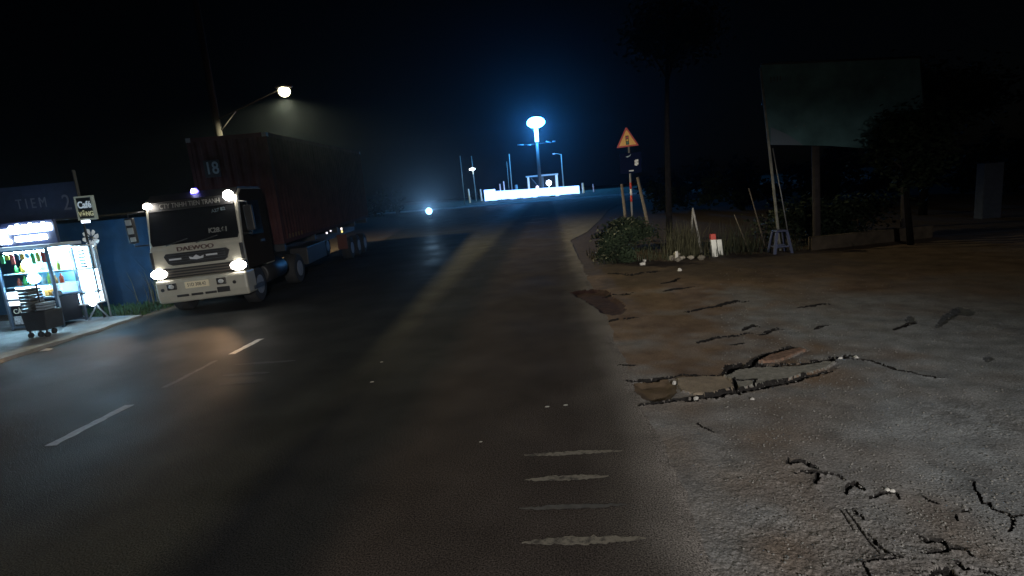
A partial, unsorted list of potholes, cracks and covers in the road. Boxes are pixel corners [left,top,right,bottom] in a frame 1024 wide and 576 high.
crack [786,457,1024,576]
pothole [934,307,975,328]
pothole [632,379,677,402]
pothole [570,289,627,316]
crack [605,271,945,406]
